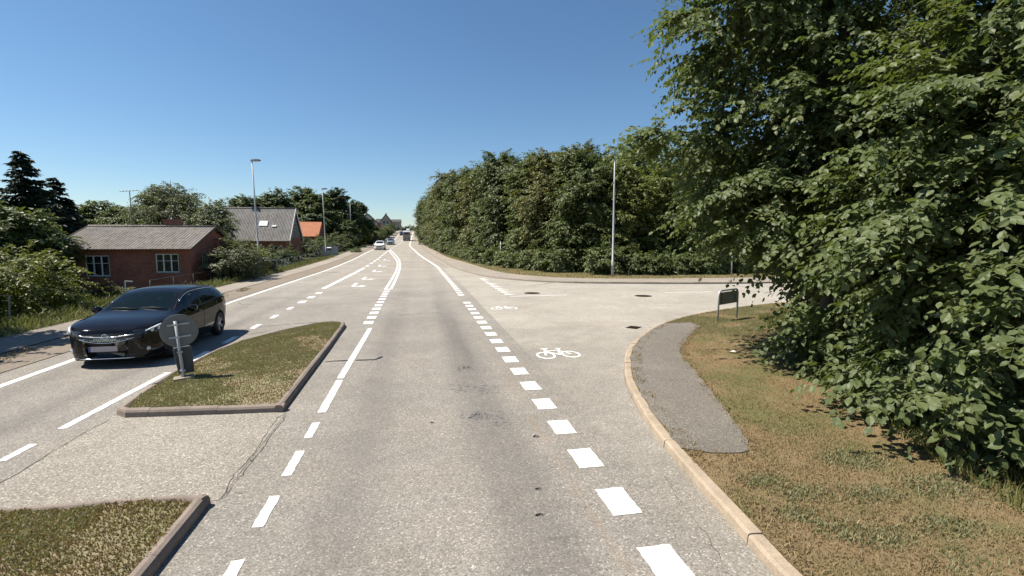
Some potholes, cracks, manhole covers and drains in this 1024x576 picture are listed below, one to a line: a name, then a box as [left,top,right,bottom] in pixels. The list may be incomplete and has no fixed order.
crack [665,476,720,556]
crack [220,414,287,500]
